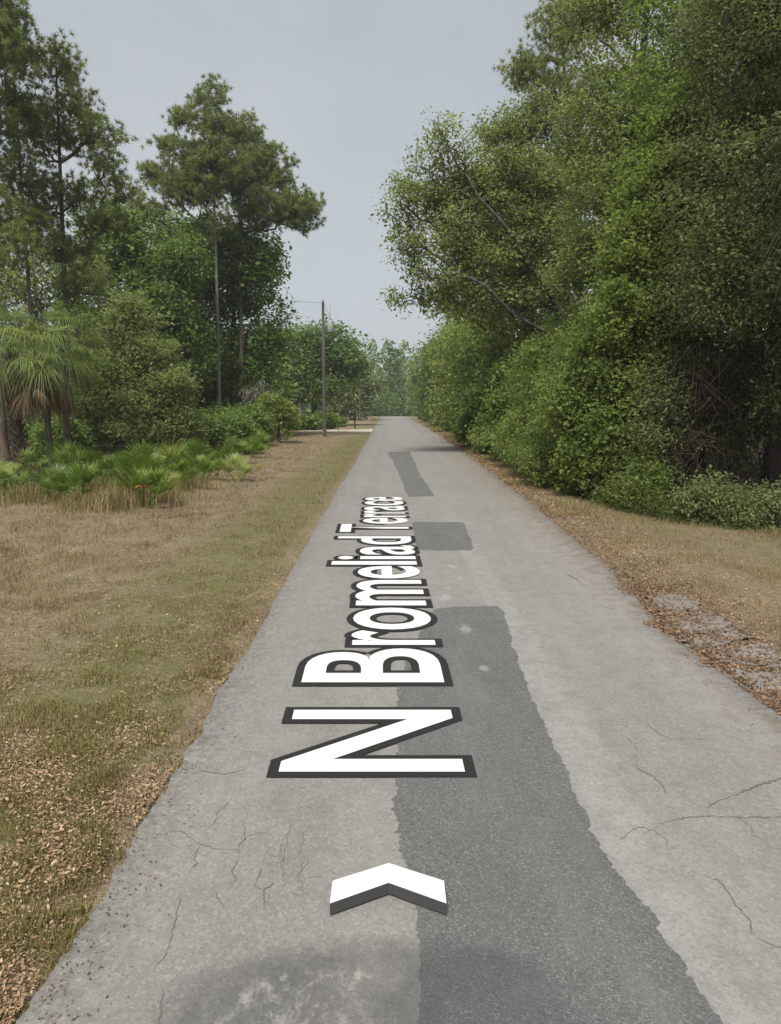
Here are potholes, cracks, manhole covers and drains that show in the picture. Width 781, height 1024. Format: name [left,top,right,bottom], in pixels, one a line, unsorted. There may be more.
crack [156,892,182,1024]
crack [707,876,779,947]
crack [623,777,781,846]
crack [168,803,265,911]
crack [254,804,328,905]
